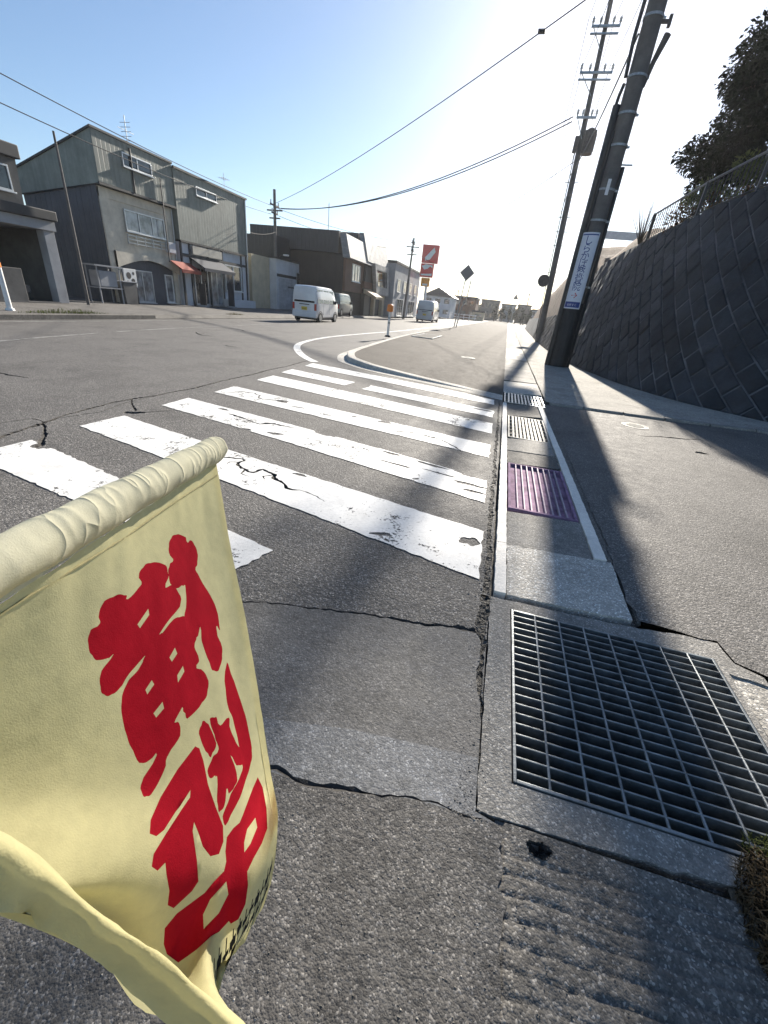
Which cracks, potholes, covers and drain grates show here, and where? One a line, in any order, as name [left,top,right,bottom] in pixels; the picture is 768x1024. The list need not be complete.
drain grate [510,609,768,864]
drain grate [507,415,551,444]
drain grate [507,462,579,522]
pothole [526,841,553,861]
crack [227,457,317,497]
drain grate [504,392,545,408]
crack [0,361,306,448]
